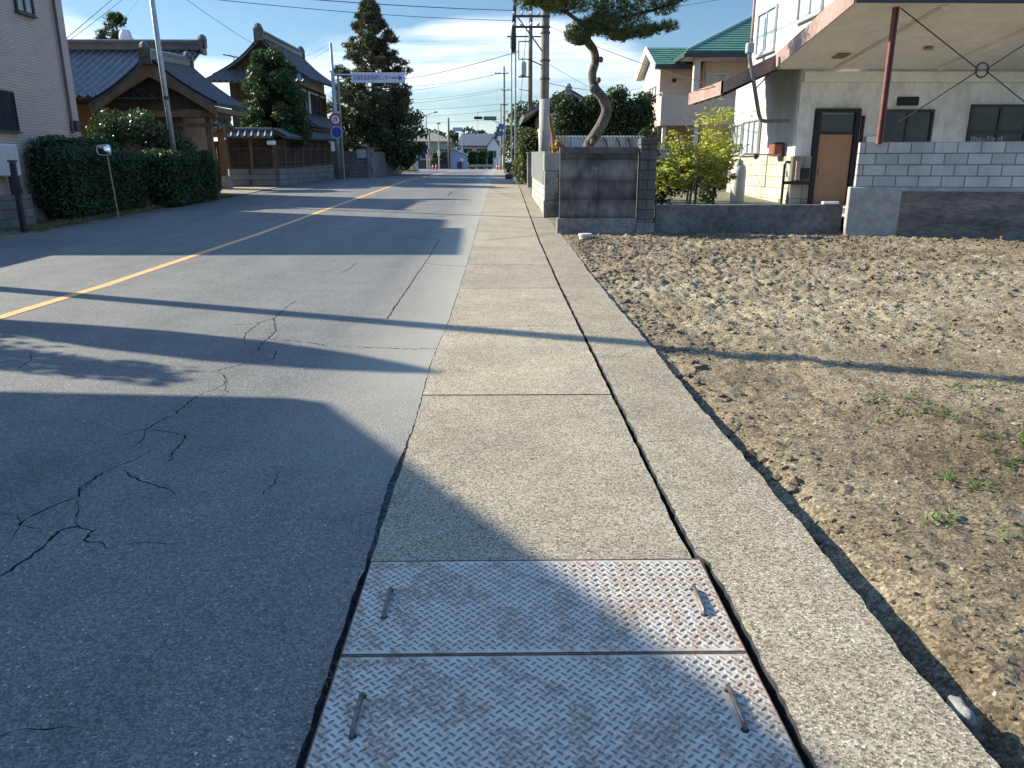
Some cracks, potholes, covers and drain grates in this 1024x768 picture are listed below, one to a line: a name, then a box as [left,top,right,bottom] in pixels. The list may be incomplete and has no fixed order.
crack [0,726,84,737]
crack [0,300,436,577]
